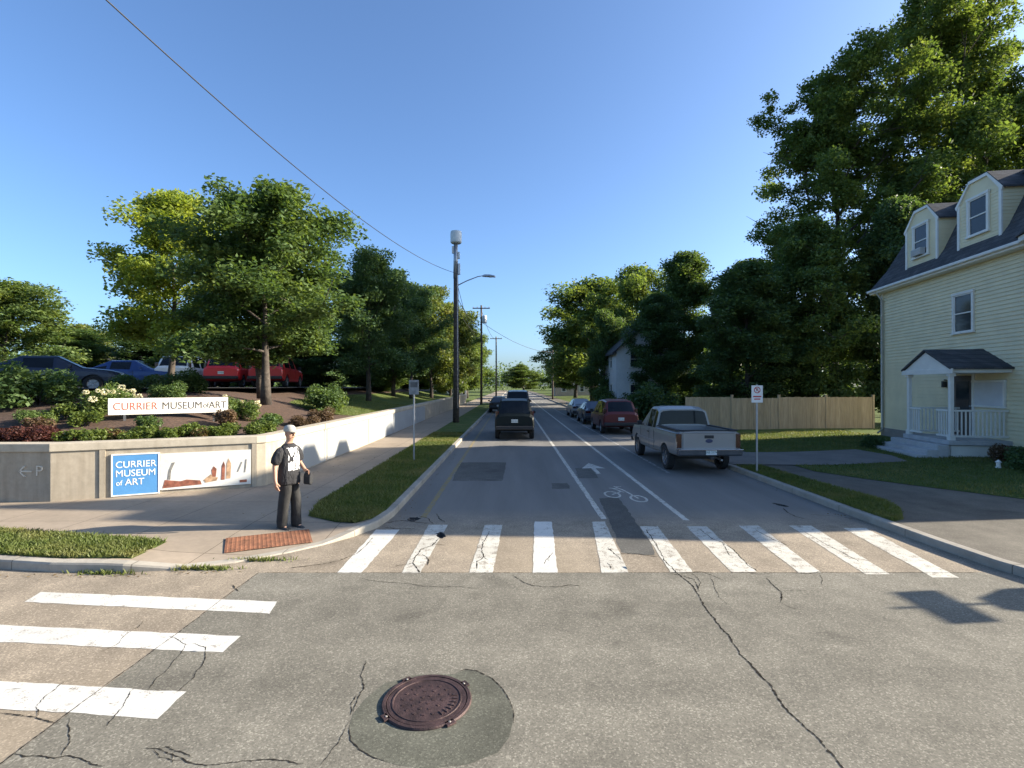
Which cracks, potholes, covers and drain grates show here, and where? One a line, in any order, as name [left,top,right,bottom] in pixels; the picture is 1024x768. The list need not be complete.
manhole cover [380,674,472,731]
crack [148,636,219,690]
crack [322,663,384,763]
crack [607,530,844,768]
crack [0,683,99,766]
